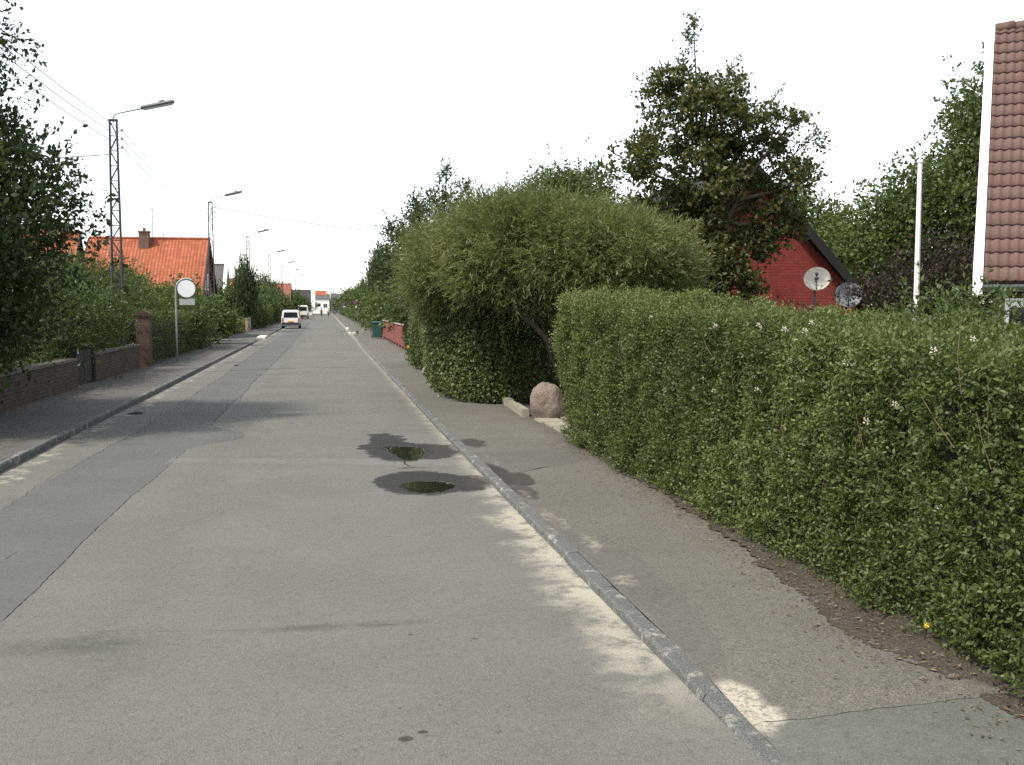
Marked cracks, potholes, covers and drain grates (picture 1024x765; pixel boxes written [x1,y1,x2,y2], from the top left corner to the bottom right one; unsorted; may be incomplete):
pothole [381,446,425,461]
pothole [399,481,457,493]
